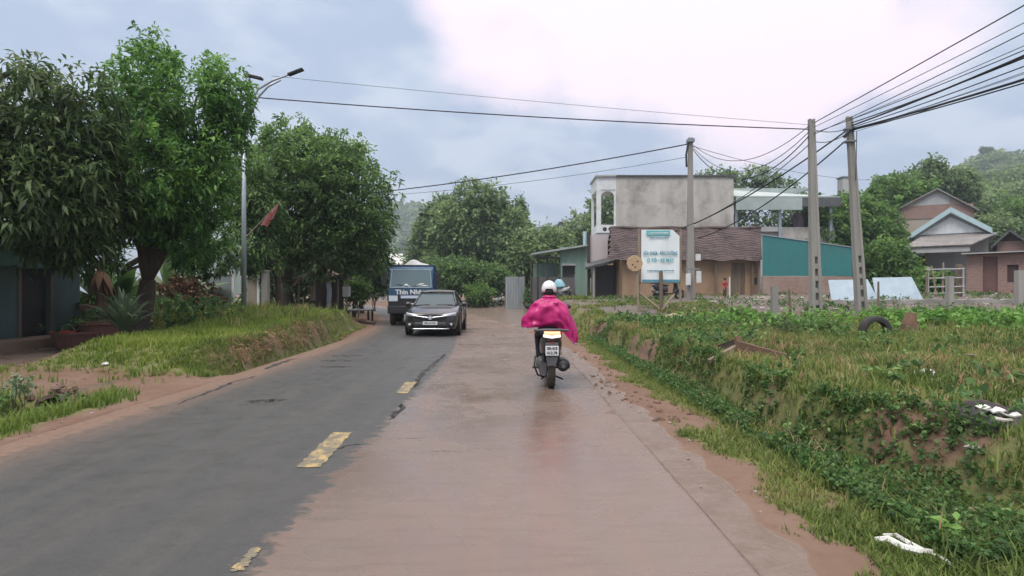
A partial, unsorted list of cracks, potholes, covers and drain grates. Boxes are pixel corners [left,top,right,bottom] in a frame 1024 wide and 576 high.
crack [390,353,464,419]
crack [177,358,299,405]
